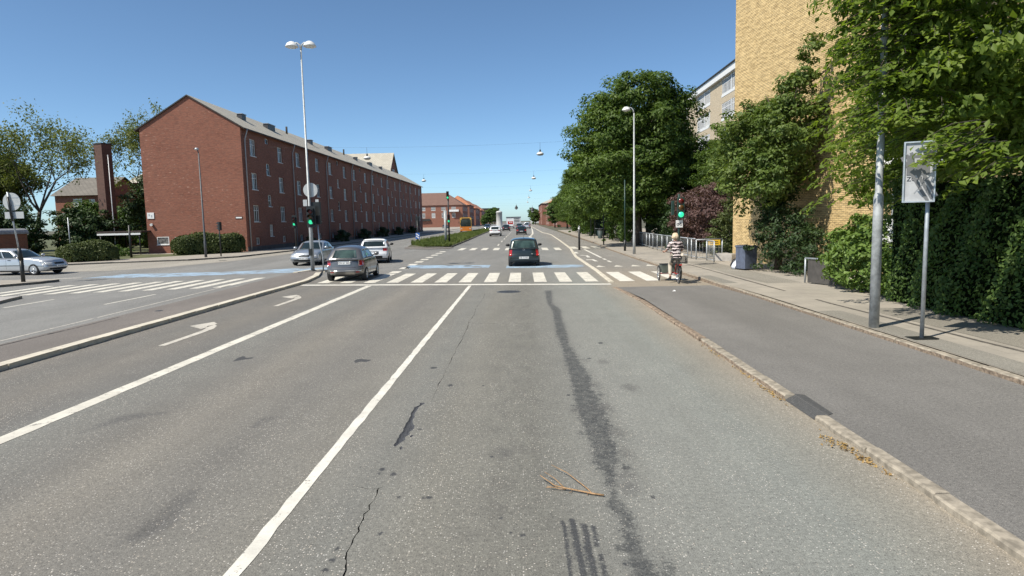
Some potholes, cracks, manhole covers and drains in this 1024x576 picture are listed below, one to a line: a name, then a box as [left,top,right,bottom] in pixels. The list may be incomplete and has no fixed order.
pothole [394,403,425,450]
crack [343,486,379,576]
